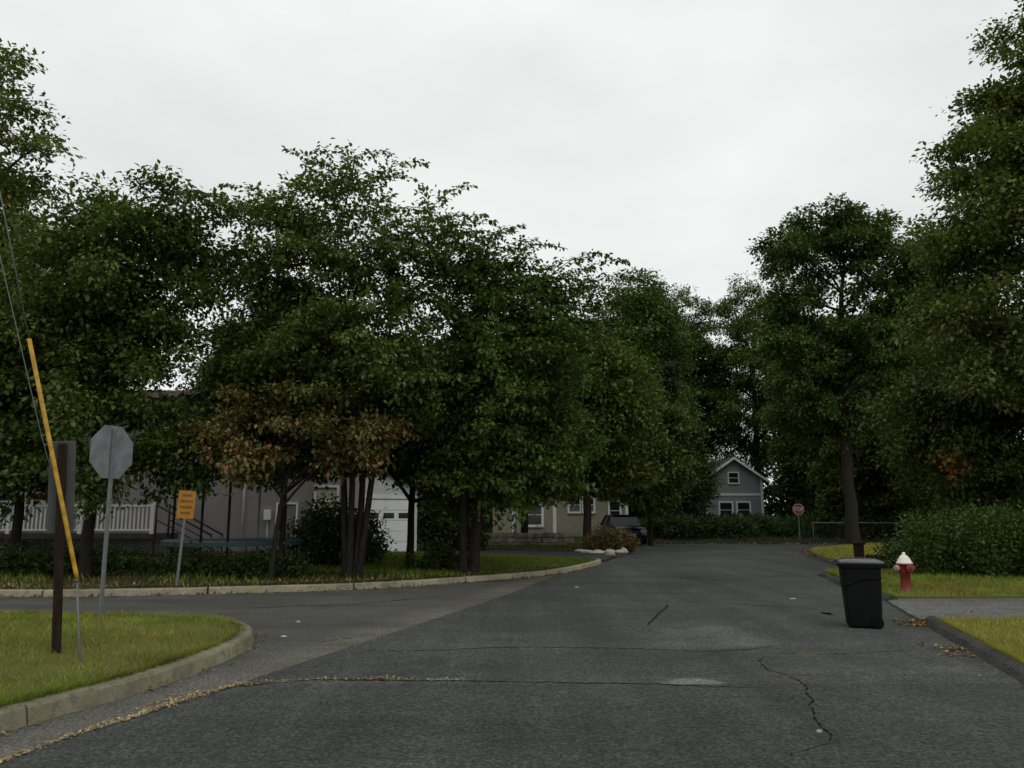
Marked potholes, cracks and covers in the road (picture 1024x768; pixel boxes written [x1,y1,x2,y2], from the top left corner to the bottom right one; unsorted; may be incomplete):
crack [631,600,824,626]
crack [273,635,906,756]
